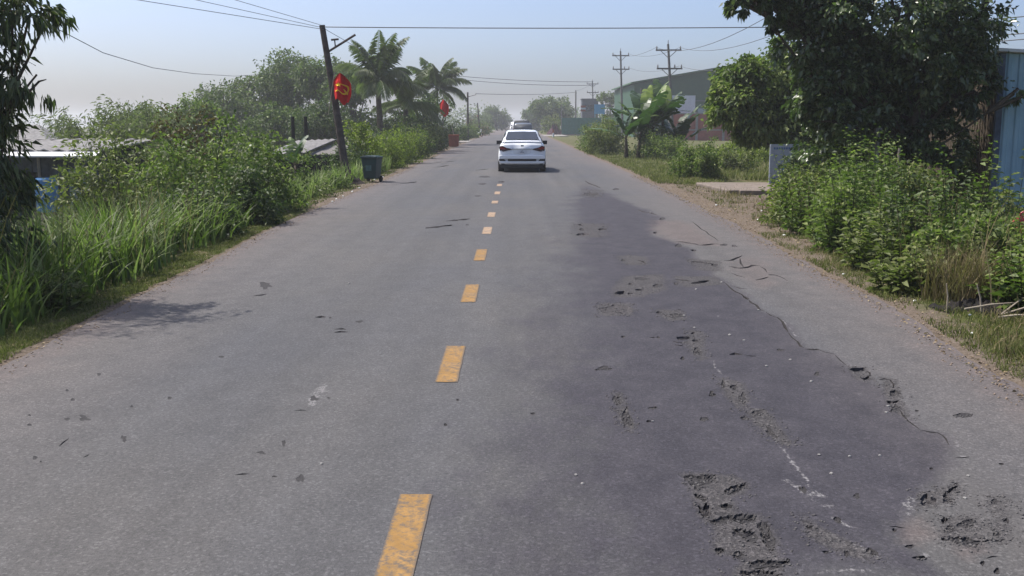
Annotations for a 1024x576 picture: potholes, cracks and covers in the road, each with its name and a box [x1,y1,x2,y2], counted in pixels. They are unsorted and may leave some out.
crack [675,222,789,299]
pothole [757,521,776,551]
pothole [944,536,981,547]
pothole [724,482,747,495]
pothole [709,513,756,525]
pothole [684,474,717,490]
pothole [698,503,712,517]
pothole [621,406,634,429]
pothole [732,528,759,542]
crack [900,410,967,458]
pothole [920,493,937,506]
pothole [749,559,790,570]
